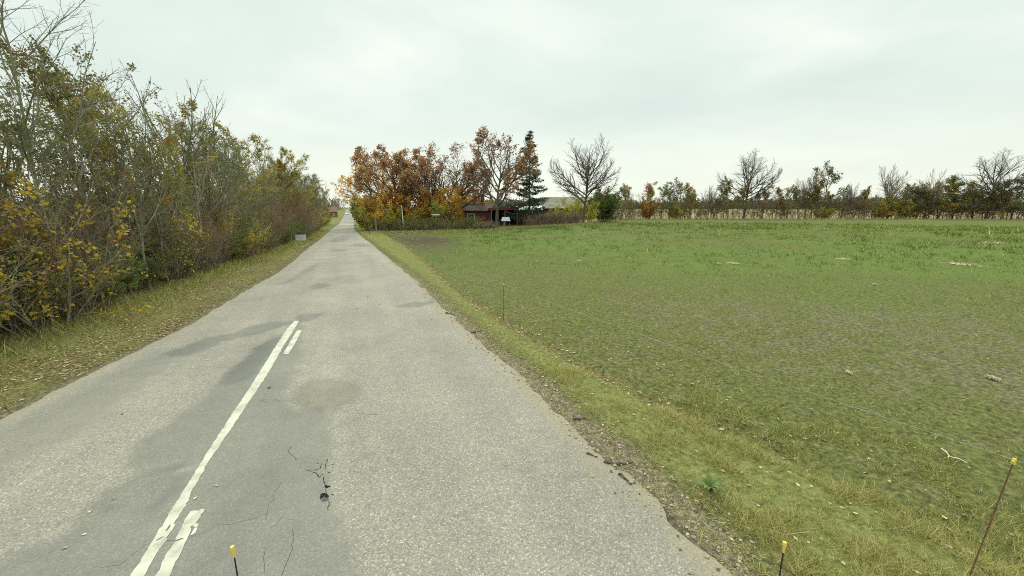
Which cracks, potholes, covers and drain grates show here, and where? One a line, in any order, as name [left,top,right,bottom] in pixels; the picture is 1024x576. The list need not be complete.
crack [288,446,334,508]
crack [100,483,294,574]
